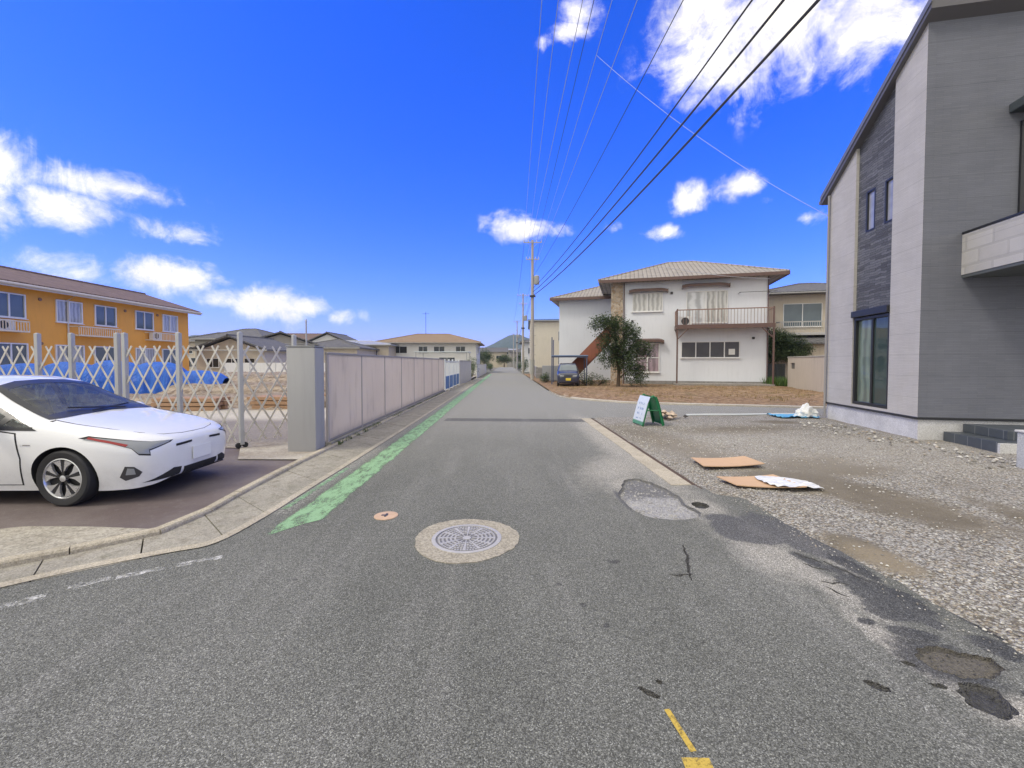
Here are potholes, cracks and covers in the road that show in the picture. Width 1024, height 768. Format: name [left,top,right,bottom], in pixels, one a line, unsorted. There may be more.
crack [670,545,692,581]
pothole [637,686,660,699]
pothole [863,680,891,692]
pothole [914,646,1006,680]
manhole cover [414,519,519,564]
pothole [956,682,1019,721]
pothole [618,478,701,520]
